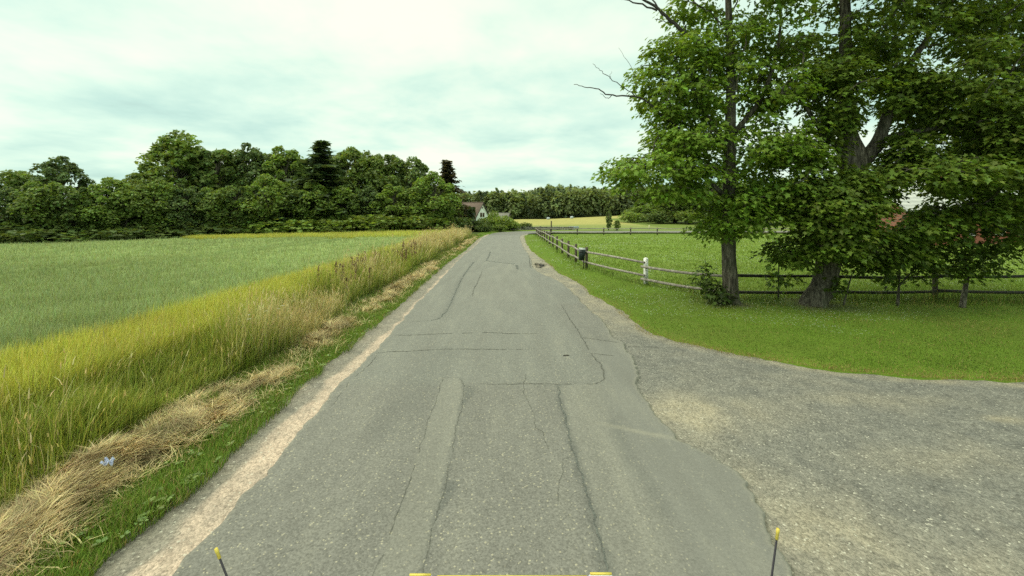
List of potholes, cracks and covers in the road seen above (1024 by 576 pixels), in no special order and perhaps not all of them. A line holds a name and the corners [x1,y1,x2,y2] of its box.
crack [482,305,615,494]
crack [372,377,456,575]
crack [423,378,464,570]
crack [332,252,536,405]
